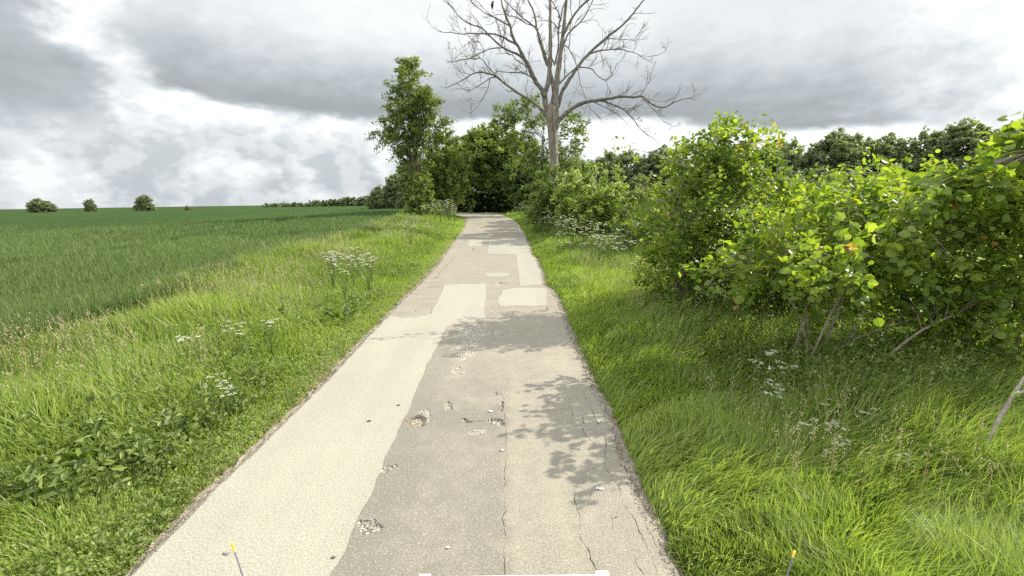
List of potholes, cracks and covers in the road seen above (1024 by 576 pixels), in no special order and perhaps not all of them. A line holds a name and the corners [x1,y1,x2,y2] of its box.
pothole [487,418,506,426]
crack [569,380,657,574]
pothole [357,518,384,535]
pothole [405,408,432,428]
